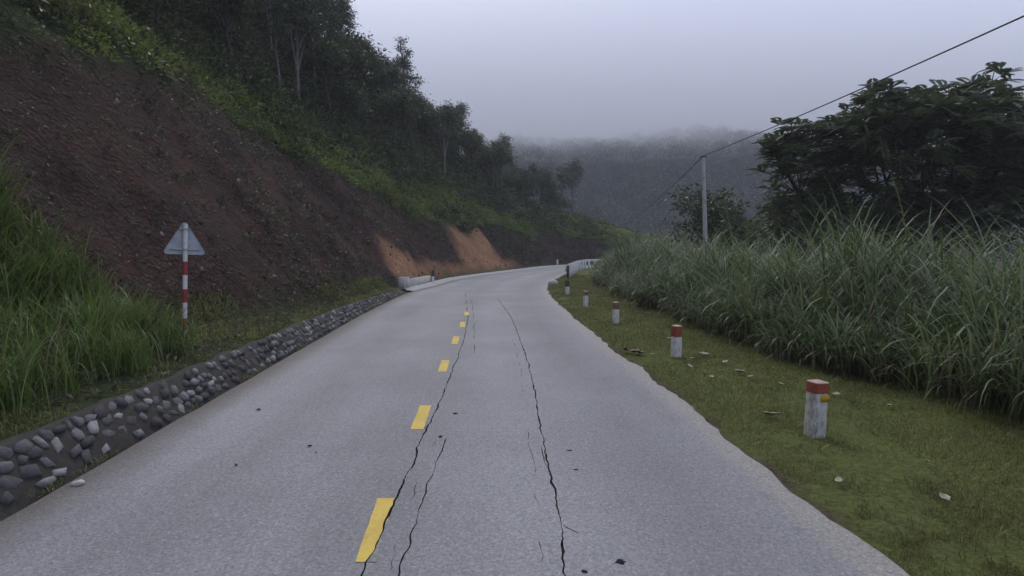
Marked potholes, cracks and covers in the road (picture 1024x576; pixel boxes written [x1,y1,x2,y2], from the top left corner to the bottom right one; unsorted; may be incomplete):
crack [360,293,475,576]
crack [497,298,578,576]
